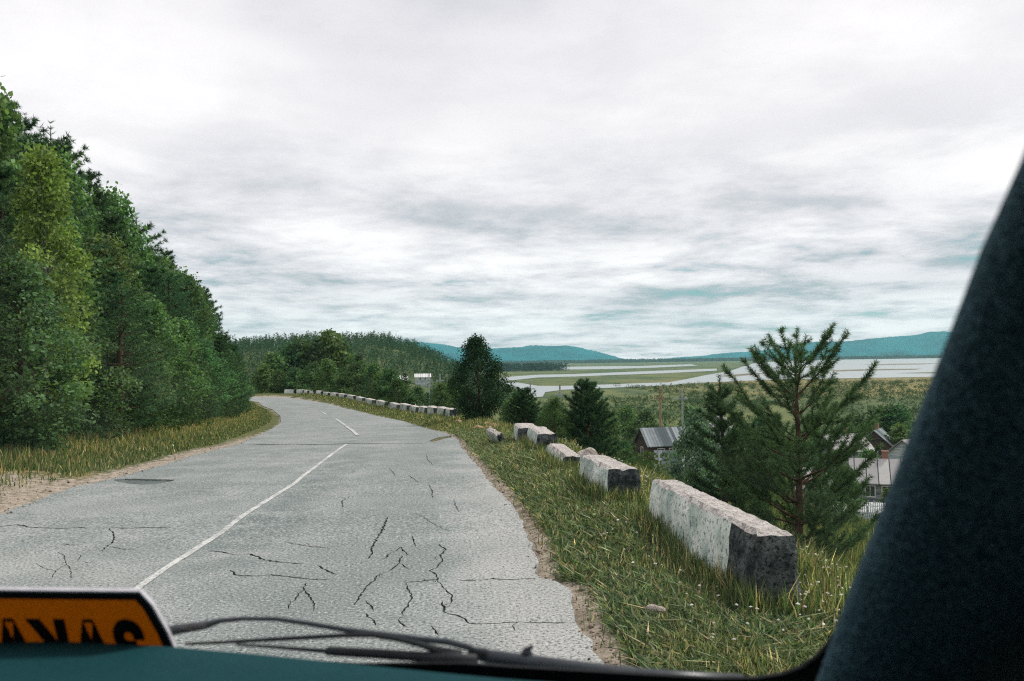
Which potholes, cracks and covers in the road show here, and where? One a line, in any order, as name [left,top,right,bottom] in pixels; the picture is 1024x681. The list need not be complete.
crack [0,513,174,579]
crack [411,436,451,498]
crack [211,542,337,611]
crack [354,503,548,635]
